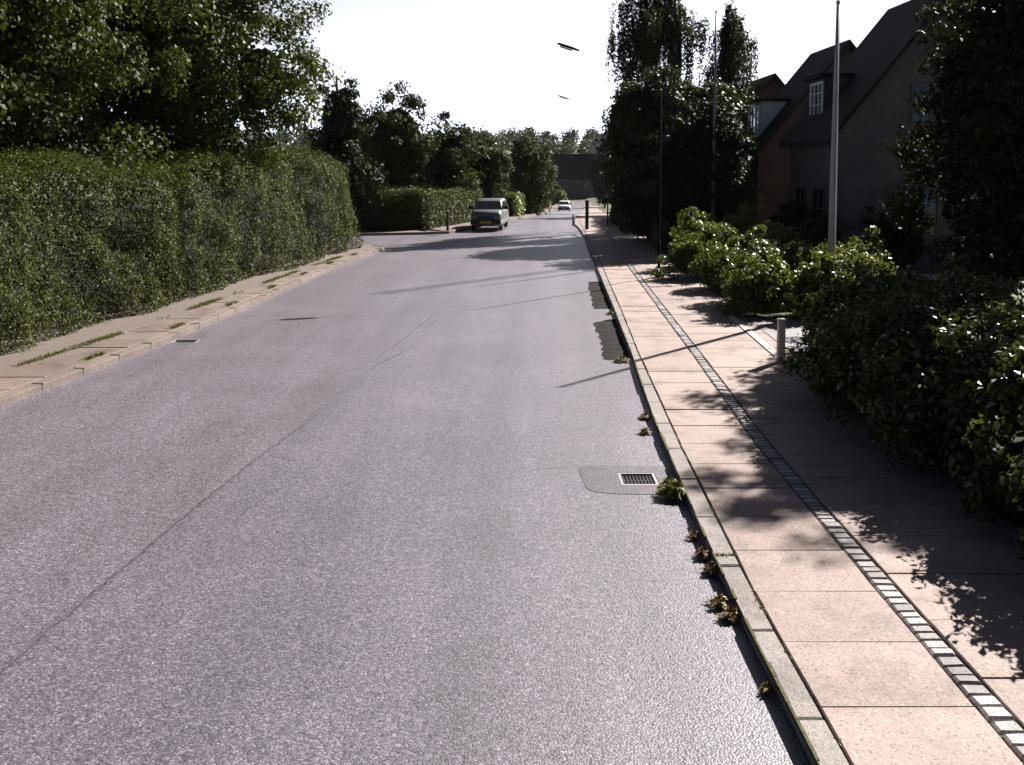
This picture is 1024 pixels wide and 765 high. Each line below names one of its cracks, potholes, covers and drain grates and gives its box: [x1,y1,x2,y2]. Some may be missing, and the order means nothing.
drain grate [617,473,659,485]
crack [362,313,436,373]
crack [0,391,344,674]
